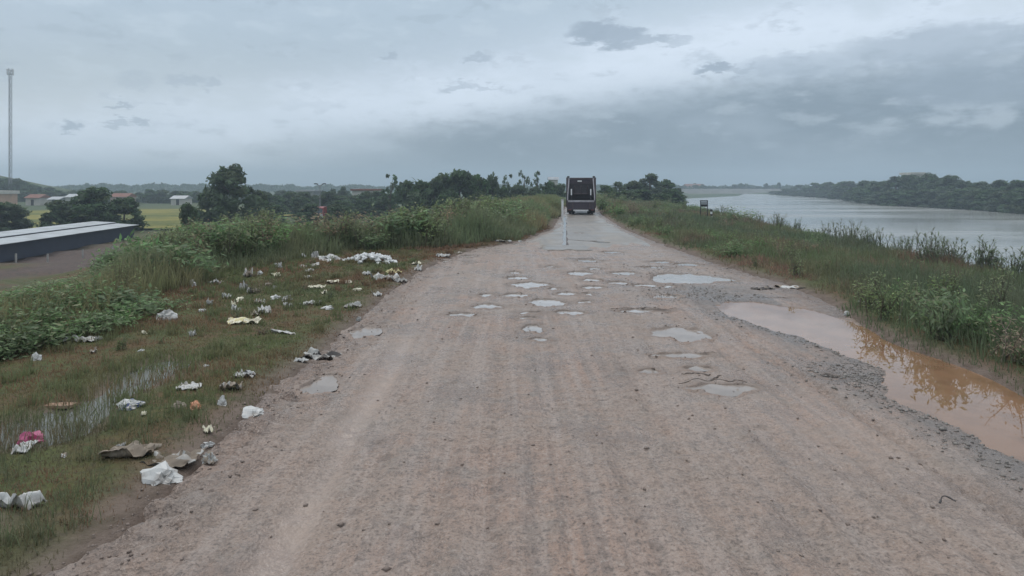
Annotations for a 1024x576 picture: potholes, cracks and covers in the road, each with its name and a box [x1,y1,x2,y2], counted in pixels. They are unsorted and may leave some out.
pothole [647,272,740,285]
pothole [645,325,719,344]
pothole [517,323,546,334]
pothole [715,302,1024,461]
crack [678,372,746,384]
pothole [466,302,508,310]
pothole [506,281,555,289]
pothole [525,298,570,307]
pothole [679,381,768,398]
pothole [293,371,346,402]
pothole [338,323,387,341]
